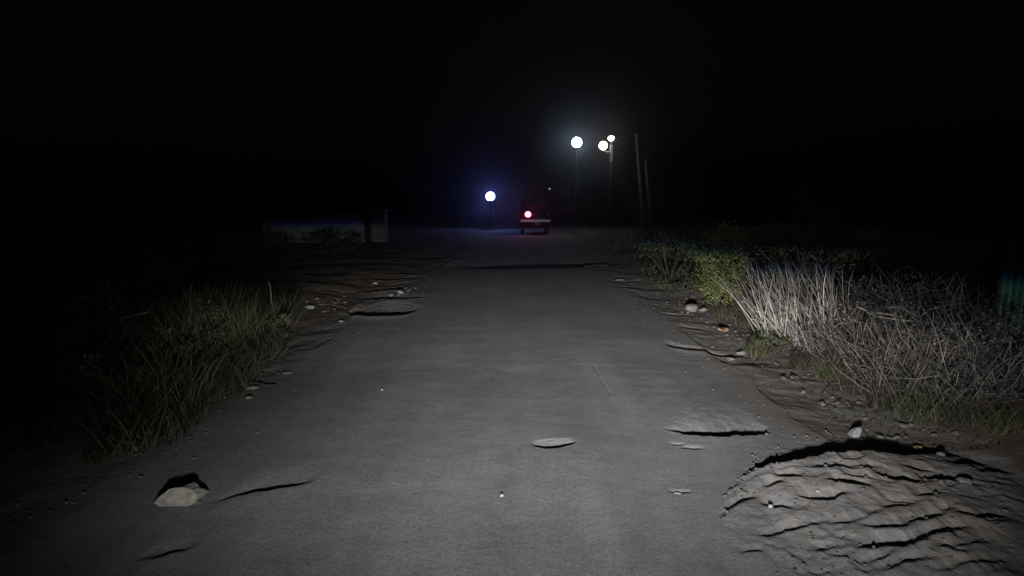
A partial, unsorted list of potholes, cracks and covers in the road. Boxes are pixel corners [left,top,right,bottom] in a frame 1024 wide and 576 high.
pothole [663,400,771,437]
crack [593,363,614,395]
